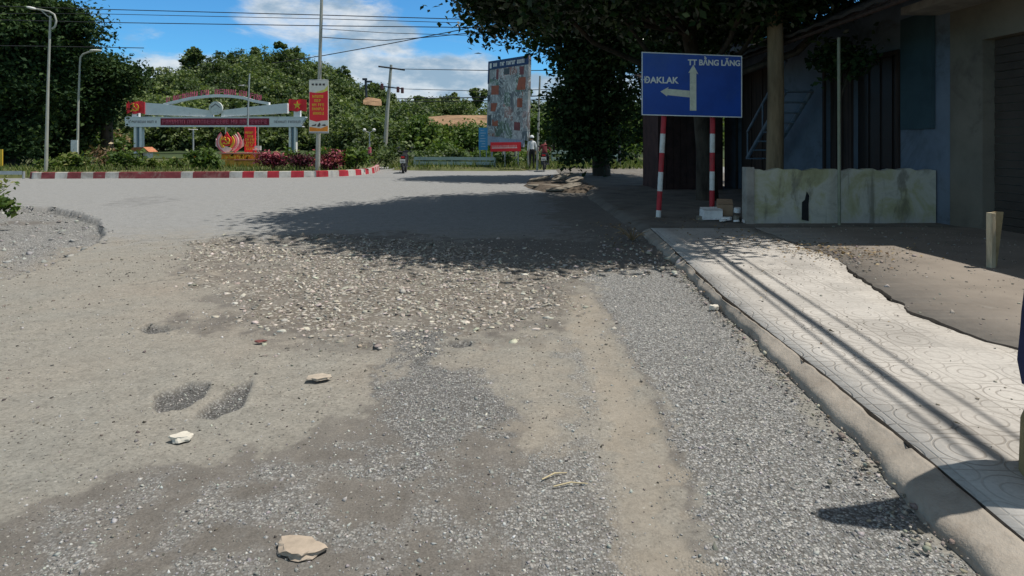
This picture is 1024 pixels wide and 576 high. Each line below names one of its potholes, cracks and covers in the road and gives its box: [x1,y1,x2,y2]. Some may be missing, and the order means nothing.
pothole [129,322,190,337]
pothole [176,373,265,427]
pothole [137,378,222,418]
